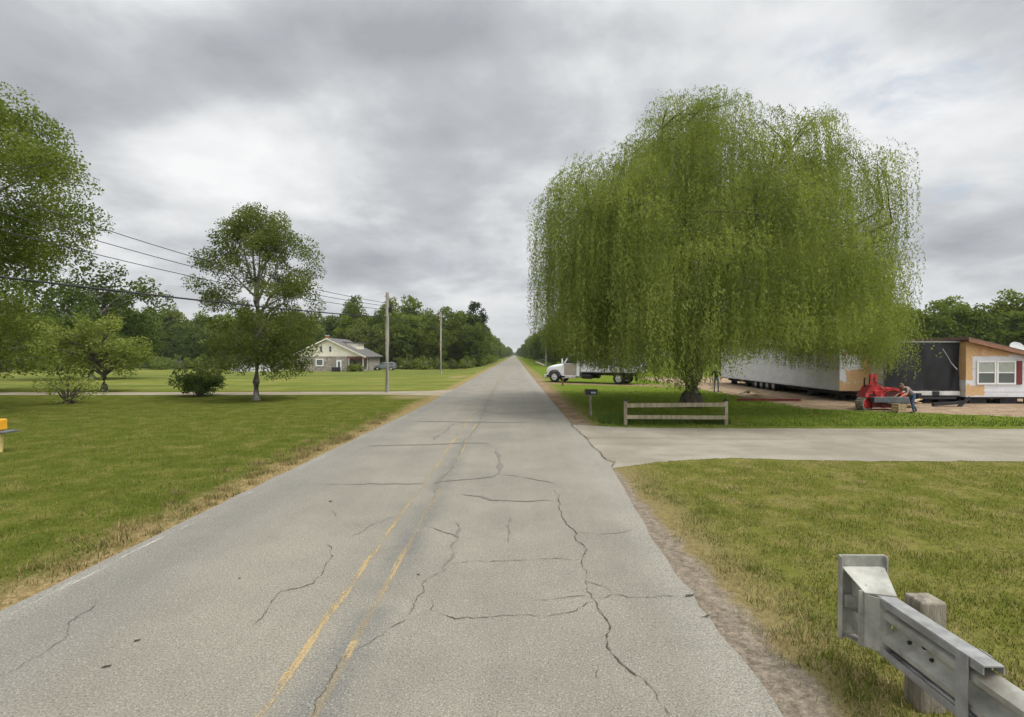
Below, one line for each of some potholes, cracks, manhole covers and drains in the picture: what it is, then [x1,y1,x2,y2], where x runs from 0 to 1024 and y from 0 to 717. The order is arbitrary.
crack [311,474,694,717]
crack [252,544,333,626]
crack [376,412,520,446]
